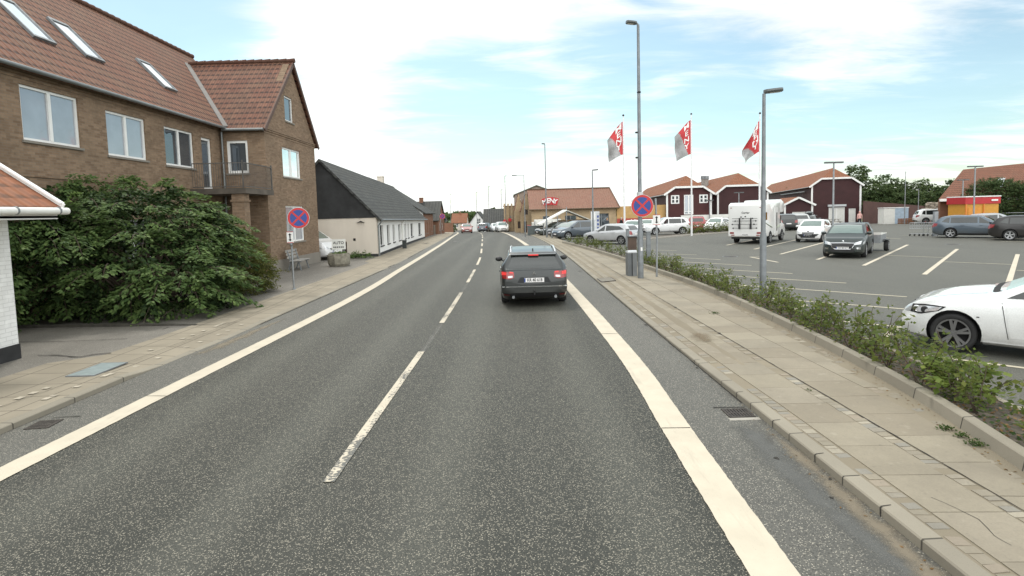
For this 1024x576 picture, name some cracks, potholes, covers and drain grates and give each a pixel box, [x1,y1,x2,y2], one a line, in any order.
manhole cover [65,362,128,377]
drain grate [721,408,756,418]
drain grate [23,419,64,430]
